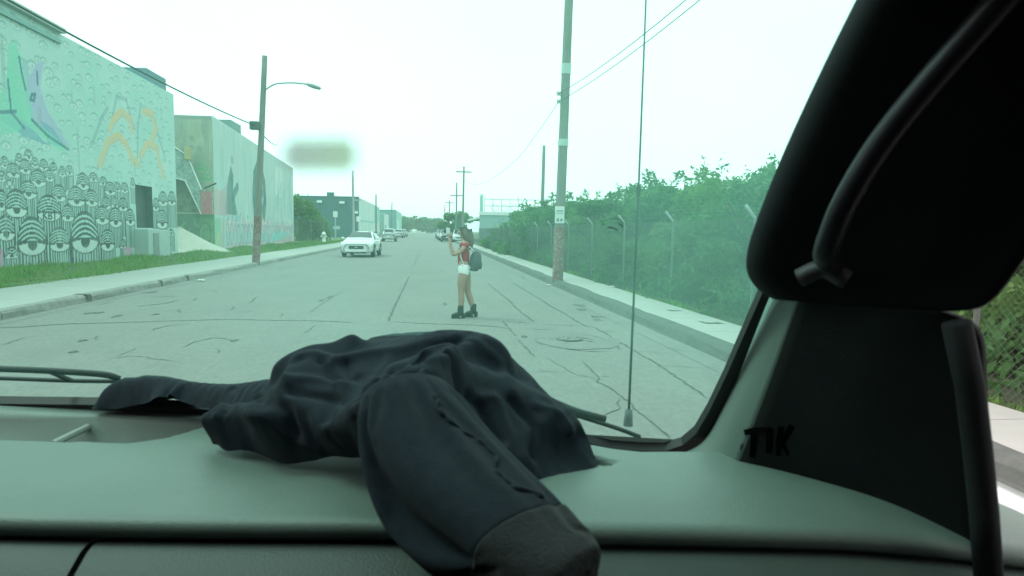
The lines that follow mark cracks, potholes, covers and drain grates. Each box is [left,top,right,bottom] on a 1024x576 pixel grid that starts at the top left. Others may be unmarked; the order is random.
crack [487,277,705,439]
